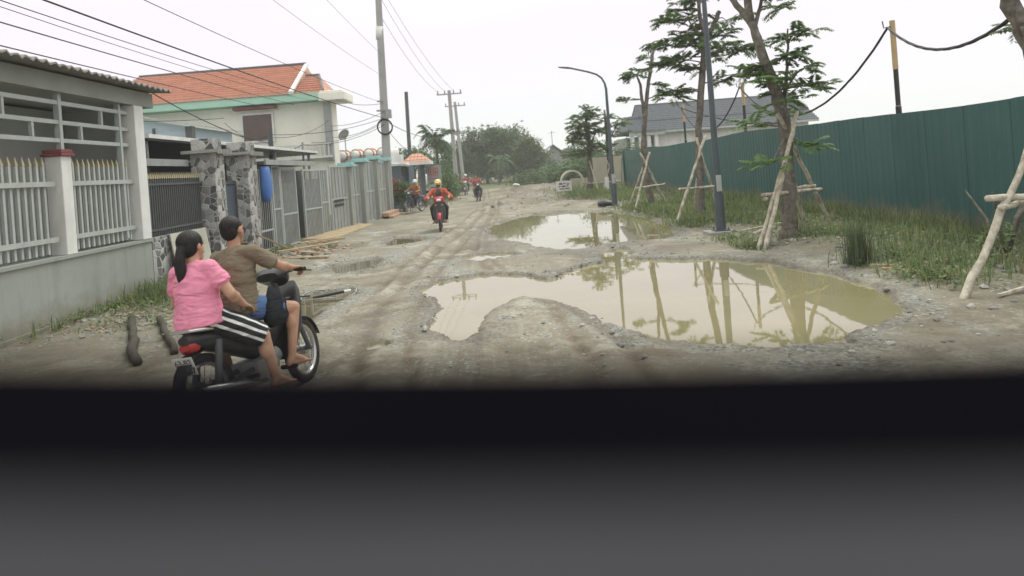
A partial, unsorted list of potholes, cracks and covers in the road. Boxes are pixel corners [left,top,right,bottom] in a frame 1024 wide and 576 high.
pothole [329,256,385,273]
pothole [414,246,910,348]
pothole [486,210,682,249]
pothole [380,237,431,246]
